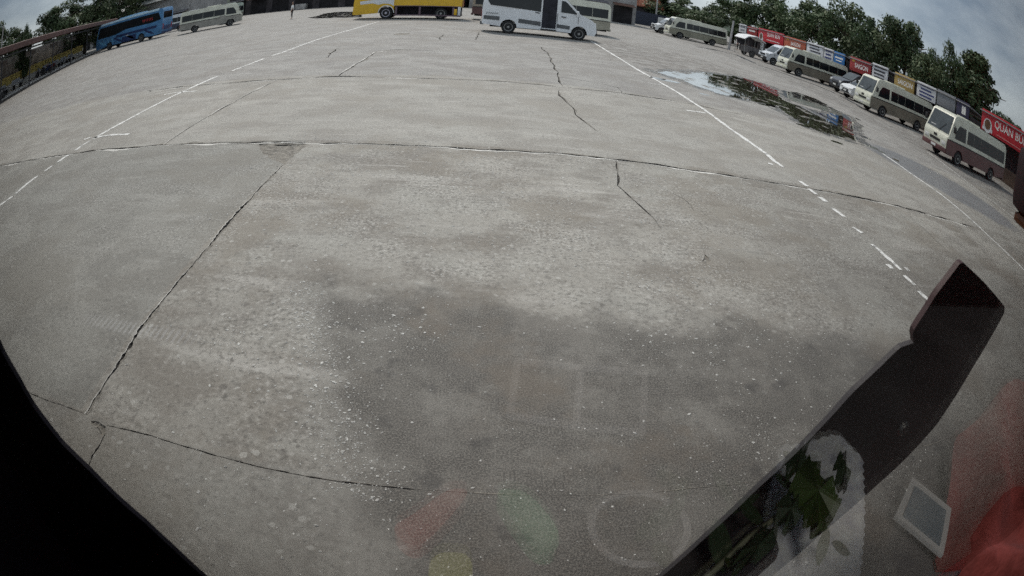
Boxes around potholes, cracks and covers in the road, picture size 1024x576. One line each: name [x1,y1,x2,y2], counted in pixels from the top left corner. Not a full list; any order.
crack [612,156,660,227]
crack [541,47,622,131]
